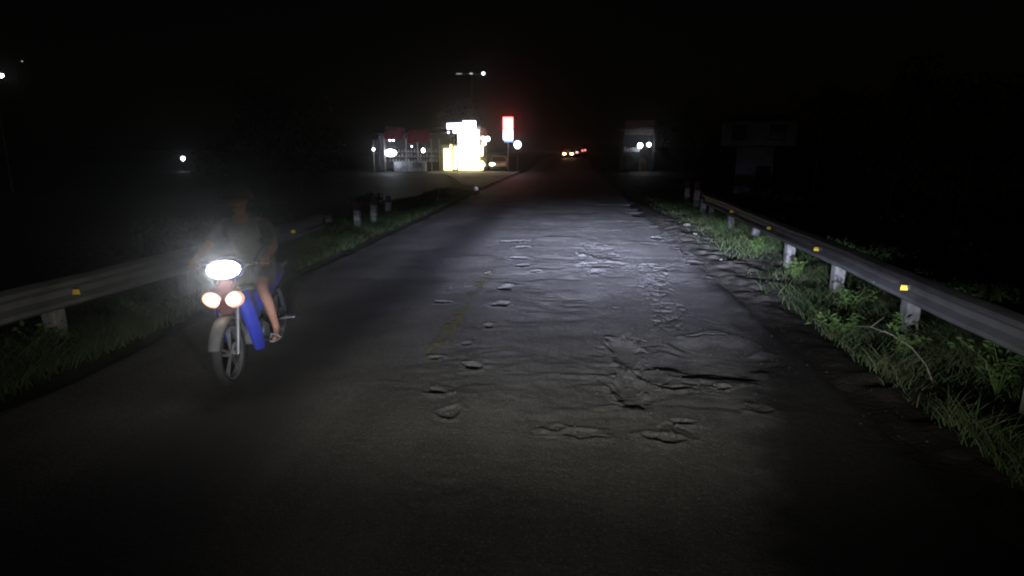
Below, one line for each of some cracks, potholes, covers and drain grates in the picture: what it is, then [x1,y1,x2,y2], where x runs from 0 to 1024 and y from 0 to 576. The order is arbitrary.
pothole [634,330,798,387]
pothole [428,401,470,423]
pothole [531,420,574,435]
pothole [453,360,491,373]
pothole [624,429,705,450]
pothole [538,425,630,446]
pothole [599,366,655,420]
pothole [477,320,499,332]
pothole [483,300,514,308]
pothole [492,283,519,292]
pothole [415,384,457,398]
